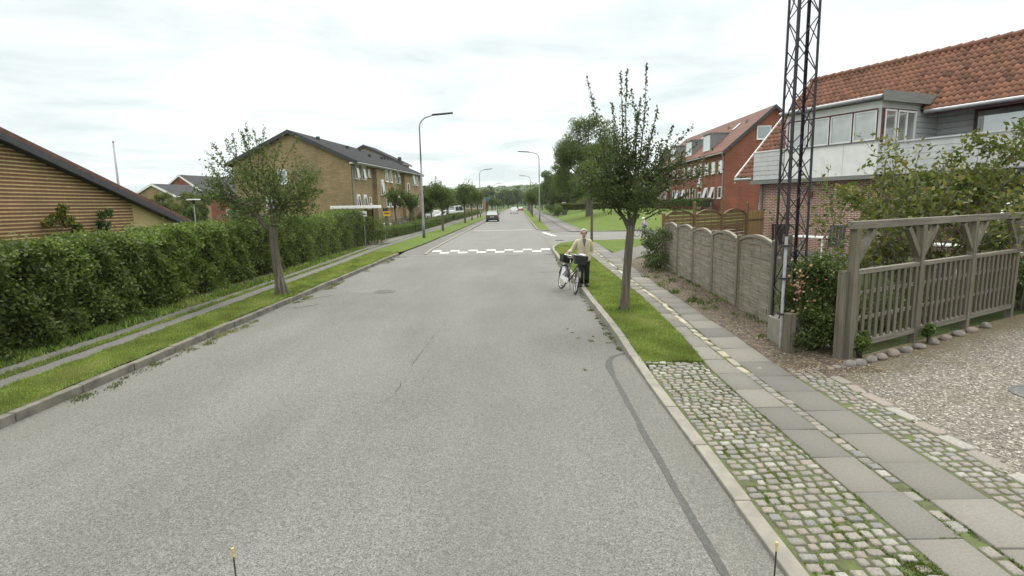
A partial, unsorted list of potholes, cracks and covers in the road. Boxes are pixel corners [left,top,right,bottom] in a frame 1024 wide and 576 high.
manhole cover [1008,385,1024,398]
